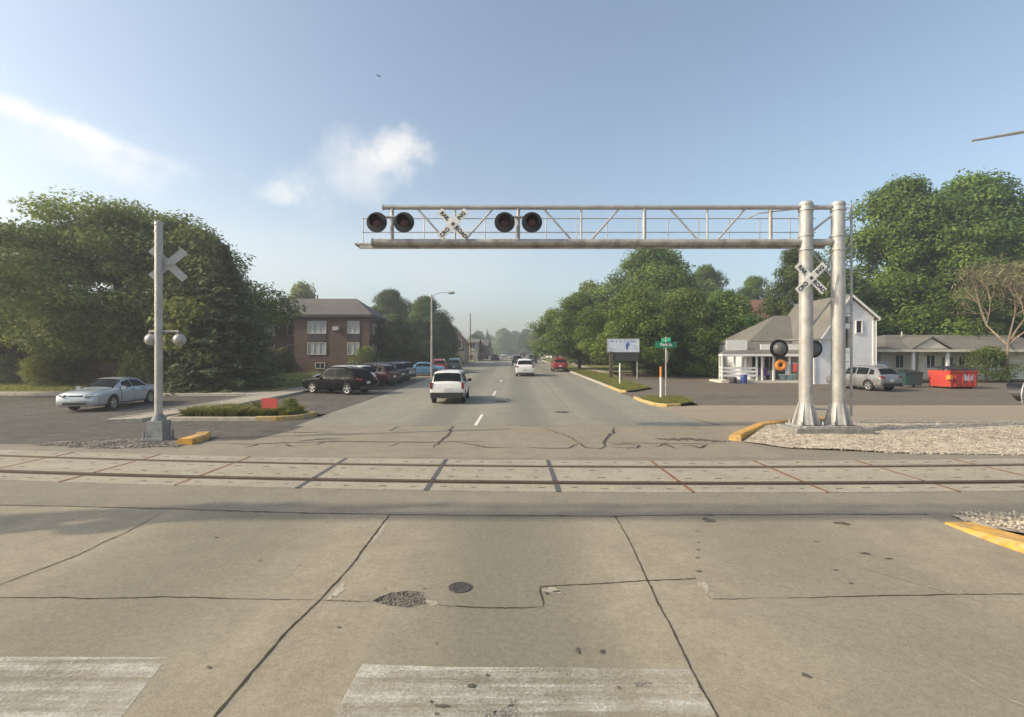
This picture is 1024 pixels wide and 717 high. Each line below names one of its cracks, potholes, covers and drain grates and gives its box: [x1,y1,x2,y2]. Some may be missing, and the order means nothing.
crack [227,425,506,448]
crack [535,427,707,449]
pothole [373,591,429,608]
manhole cover [448,582,472,593]
